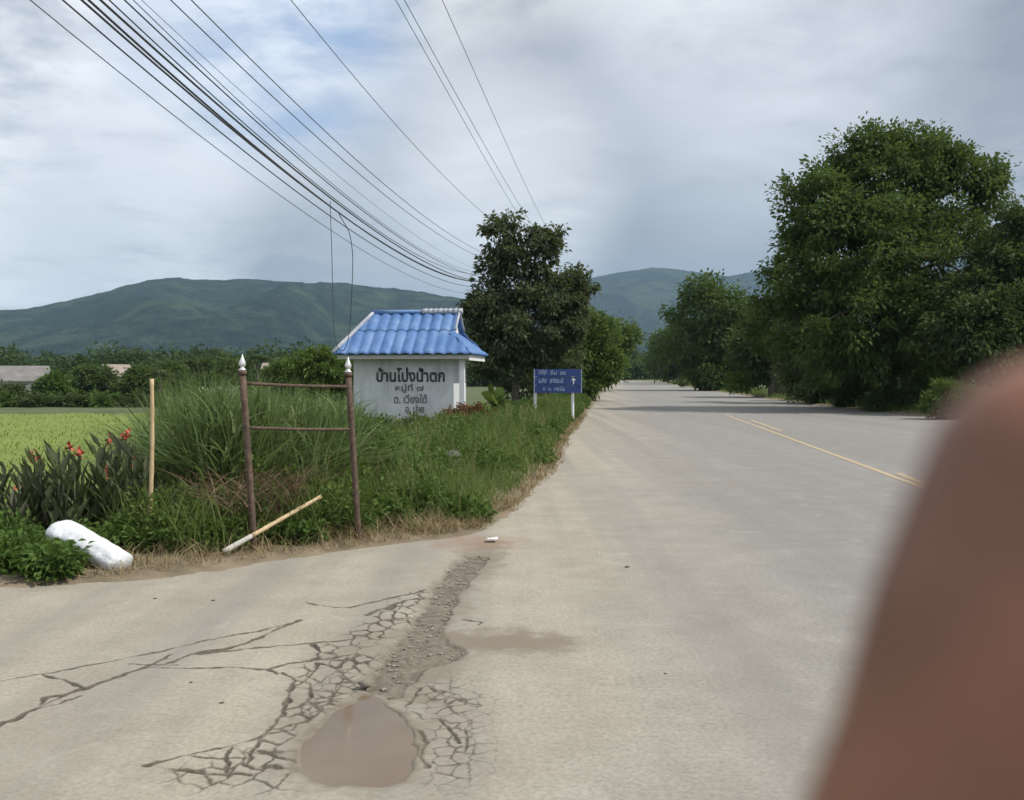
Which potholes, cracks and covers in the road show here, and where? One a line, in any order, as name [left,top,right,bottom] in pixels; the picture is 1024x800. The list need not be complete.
pothole [282,690,434,794]
pothole [347,555,495,703]
crack [0,585,504,798]
